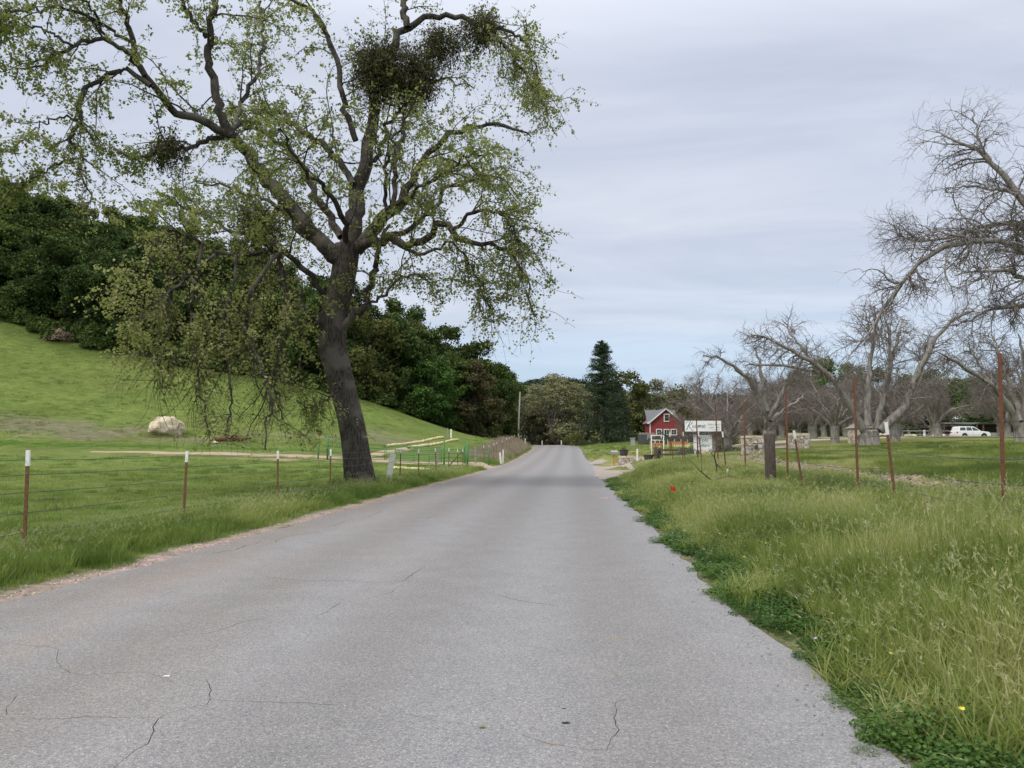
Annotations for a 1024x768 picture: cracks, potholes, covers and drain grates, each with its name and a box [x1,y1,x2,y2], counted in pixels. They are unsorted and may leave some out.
crack [17,643,185,684]
crack [0,681,334,768]
crack [526,699,625,751]
